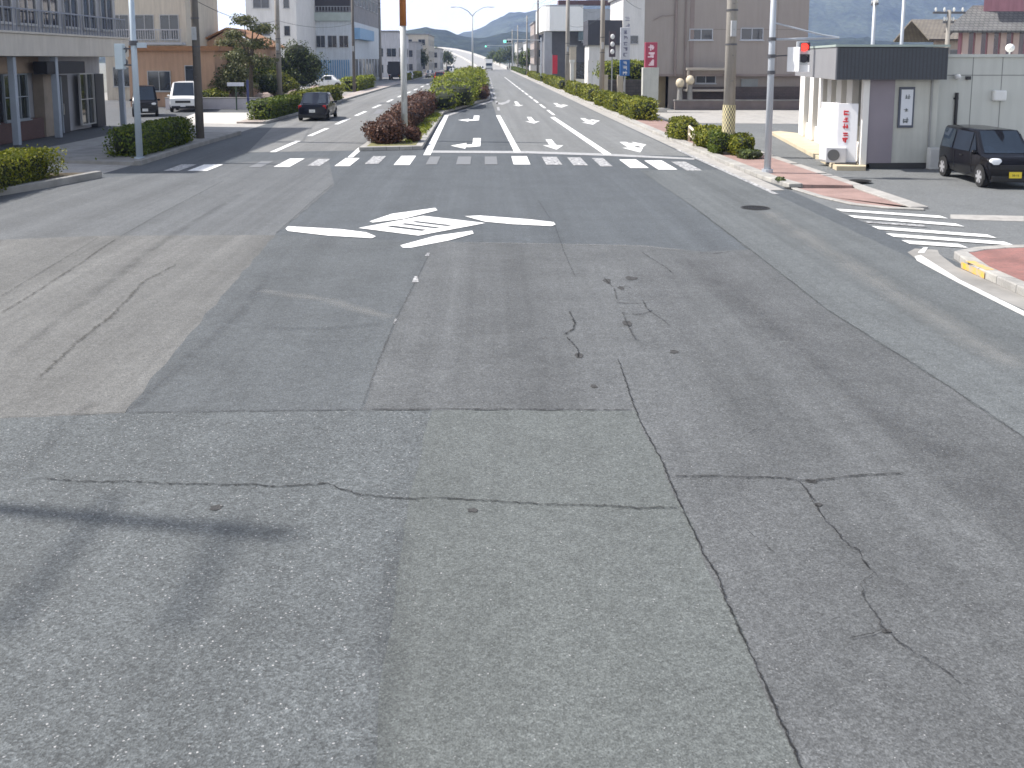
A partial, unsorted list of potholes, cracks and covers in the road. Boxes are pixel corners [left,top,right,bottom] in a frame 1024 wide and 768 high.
crack [49,478,663,508]
crack [851,590,957,681]
crack [677,473,899,569]
